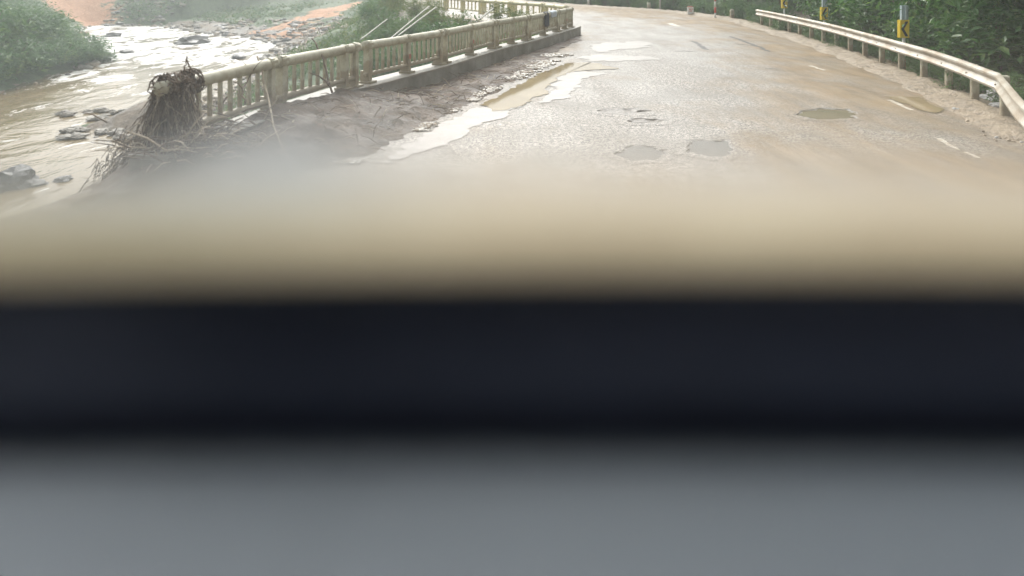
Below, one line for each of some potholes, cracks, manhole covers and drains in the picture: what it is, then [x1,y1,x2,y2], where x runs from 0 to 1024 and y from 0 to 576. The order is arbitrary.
pothole [615,116,677,126]
pothole [674,136,749,161]
pothole [586,106,662,117]
pothole [601,141,679,164]
pothole [785,106,868,122]
